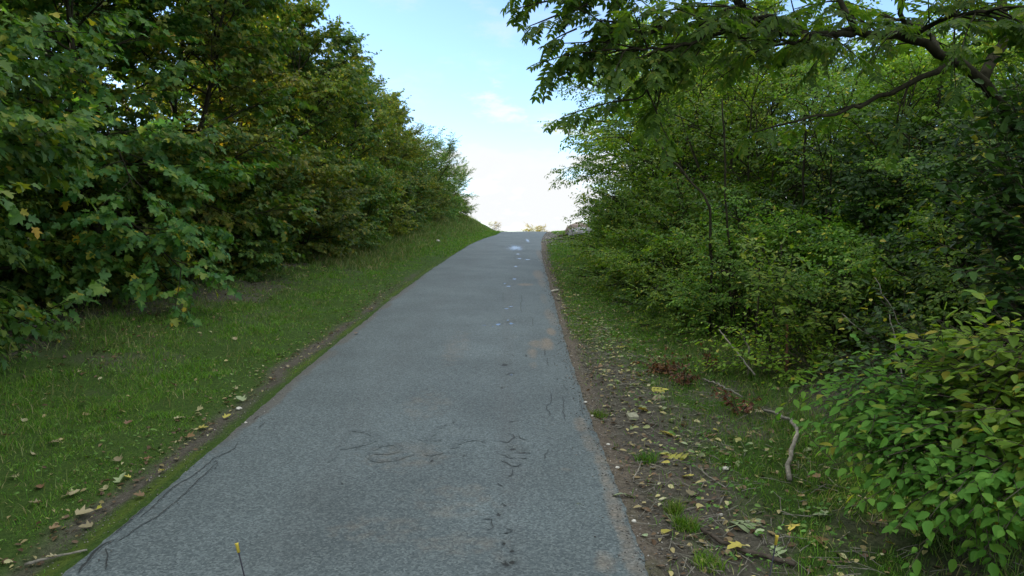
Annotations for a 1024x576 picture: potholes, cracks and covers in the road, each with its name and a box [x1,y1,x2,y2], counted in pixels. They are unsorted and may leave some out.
crack [546,385,584,419]
crack [78,442,238,572]
